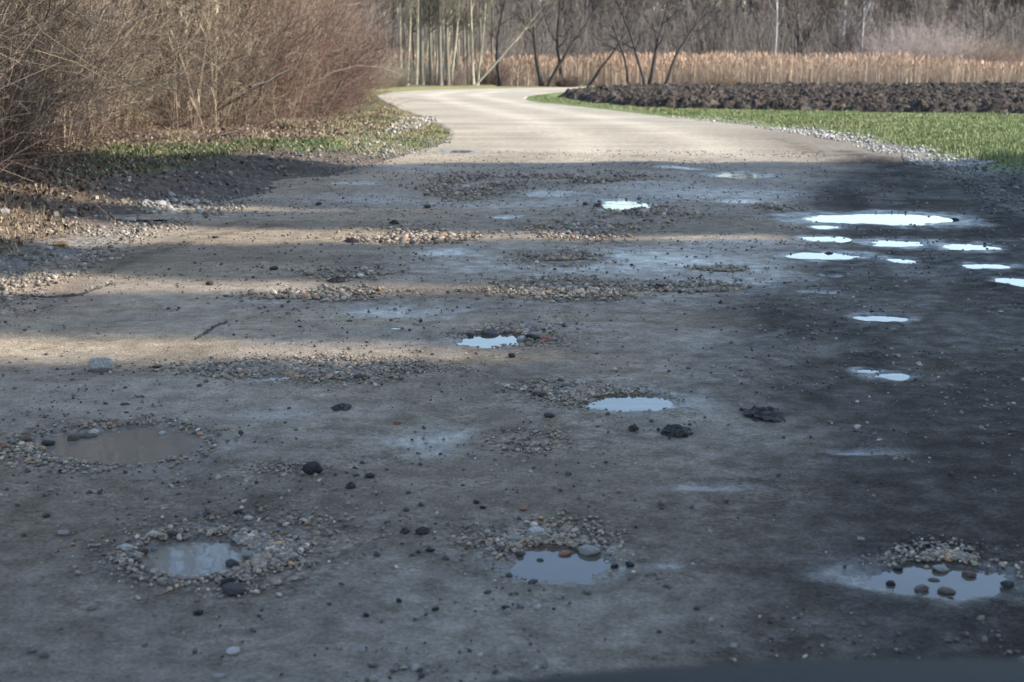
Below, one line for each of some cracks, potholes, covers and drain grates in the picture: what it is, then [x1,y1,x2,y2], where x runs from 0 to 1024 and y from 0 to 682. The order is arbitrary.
pothole [787,234,852,244]
pothole [28,499,453,634]
pothole [850,236,942,249]
pothole [980,275,1024,288]
pothole [762,248,879,262]
